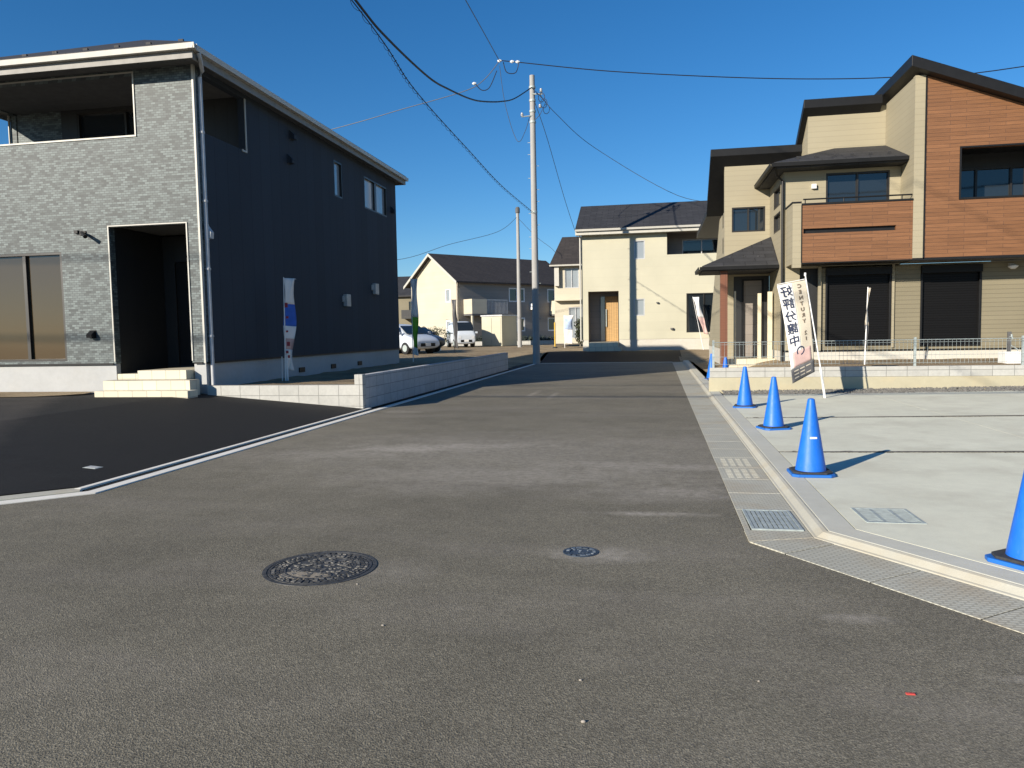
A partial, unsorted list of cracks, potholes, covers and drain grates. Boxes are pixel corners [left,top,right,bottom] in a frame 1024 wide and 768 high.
manhole cover [262,551,377,586]
manhole cover [563,546,599,557]
drain grate [742,509,804,532]
